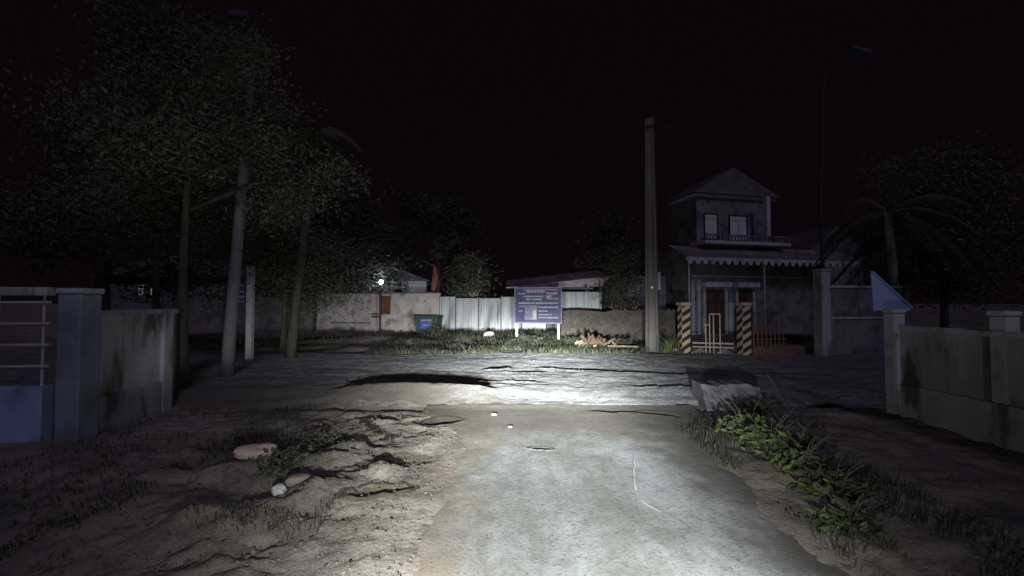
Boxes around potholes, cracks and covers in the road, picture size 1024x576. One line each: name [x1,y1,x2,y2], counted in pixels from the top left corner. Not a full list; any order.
crack [633,457,660,512]
pothole [319,369,514,388]
crack [359,418,406,438]
crack [437,367,807,388]
